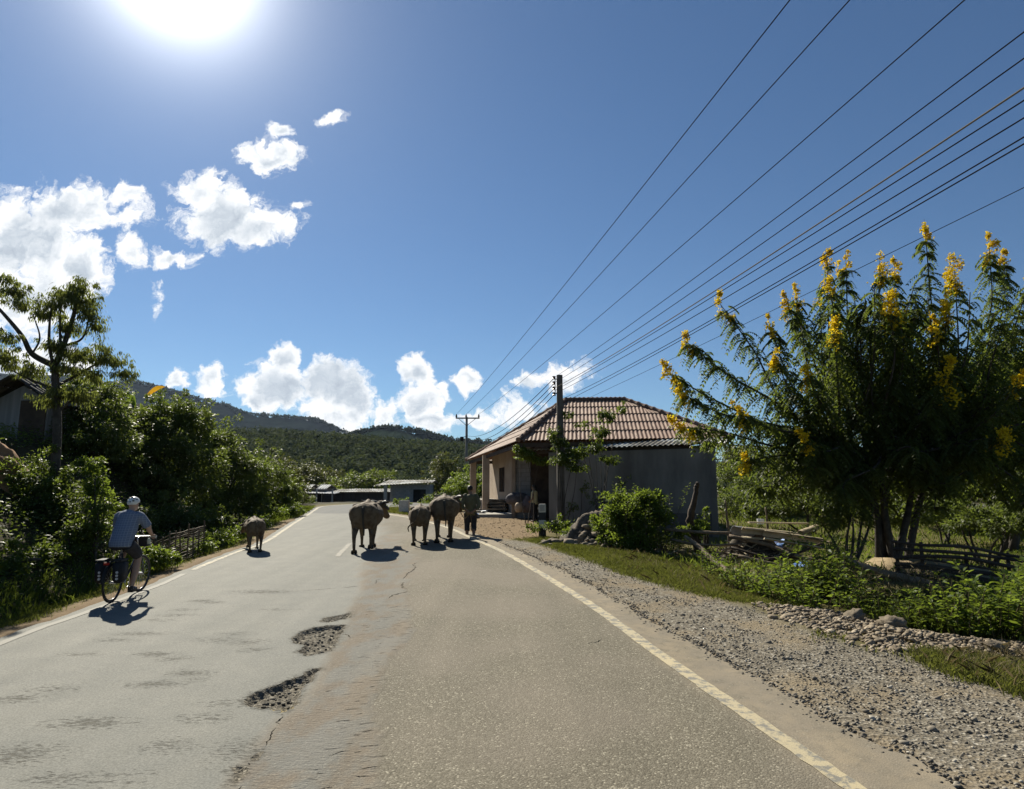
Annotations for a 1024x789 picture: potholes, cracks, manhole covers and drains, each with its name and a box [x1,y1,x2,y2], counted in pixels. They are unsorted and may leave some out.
pothole [291,625,346,656]
pothole [319,612,353,623]
crack [313,561,432,789]
pothole [243,668,323,713]
